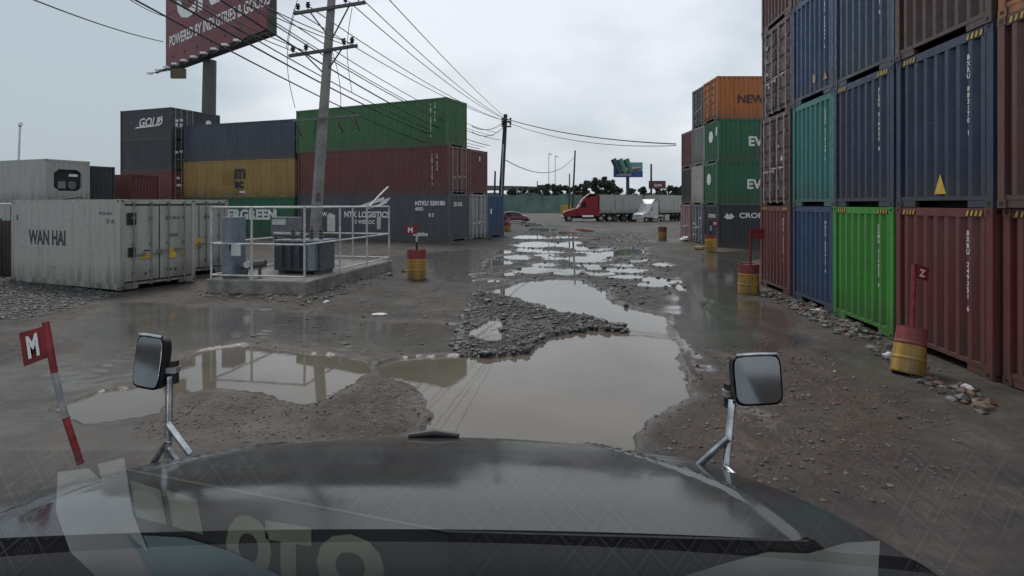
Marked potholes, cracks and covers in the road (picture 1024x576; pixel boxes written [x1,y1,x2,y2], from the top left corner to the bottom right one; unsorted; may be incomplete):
pothole [377,277,705,454]
pothole [562,255,614,263]
pothole [171,340,379,408]
pothole [603,266,656,274]
pothole [583,250,649,258]
